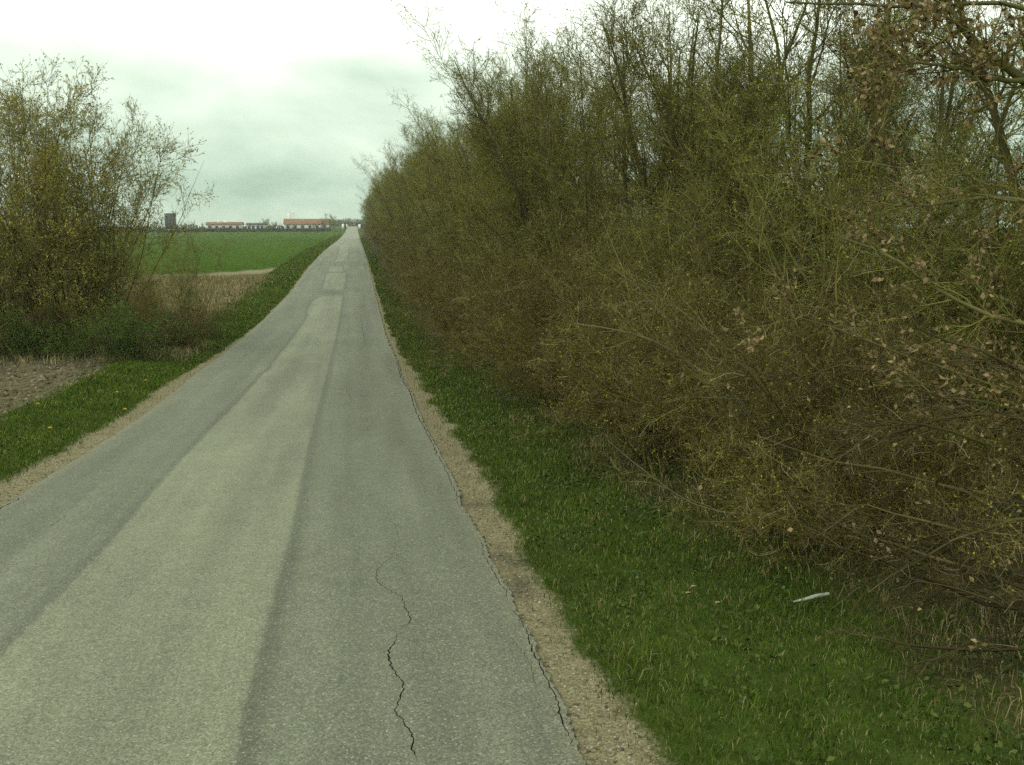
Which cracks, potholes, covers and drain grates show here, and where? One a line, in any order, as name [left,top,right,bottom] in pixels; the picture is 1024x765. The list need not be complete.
crack [376,517,416,756]
